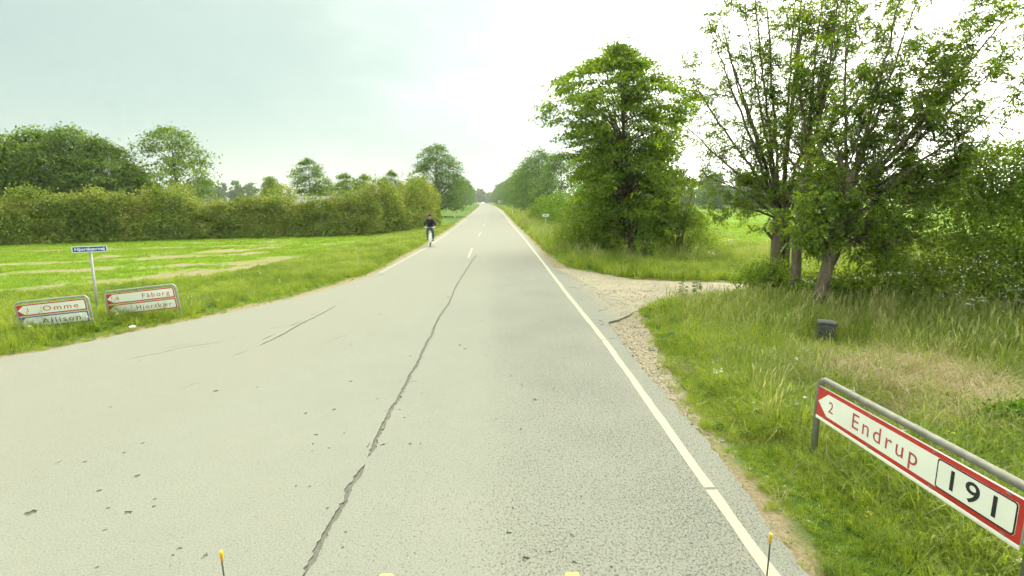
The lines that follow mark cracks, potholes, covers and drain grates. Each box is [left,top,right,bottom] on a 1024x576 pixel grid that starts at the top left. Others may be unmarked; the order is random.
crack [303,256,476,576]
